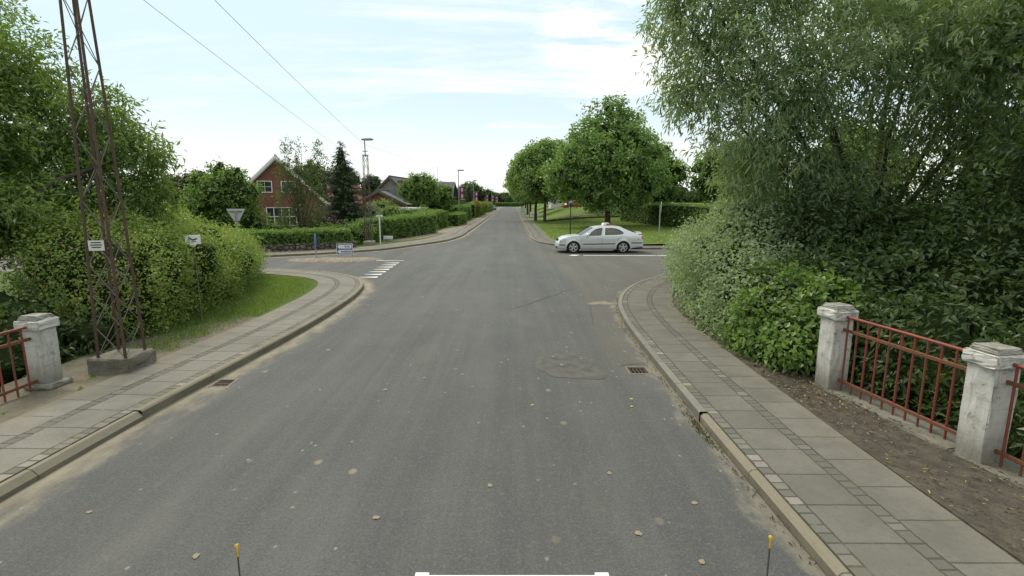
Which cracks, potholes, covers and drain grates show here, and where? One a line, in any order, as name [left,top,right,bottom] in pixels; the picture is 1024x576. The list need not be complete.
drain grate [208,379,239,387]
